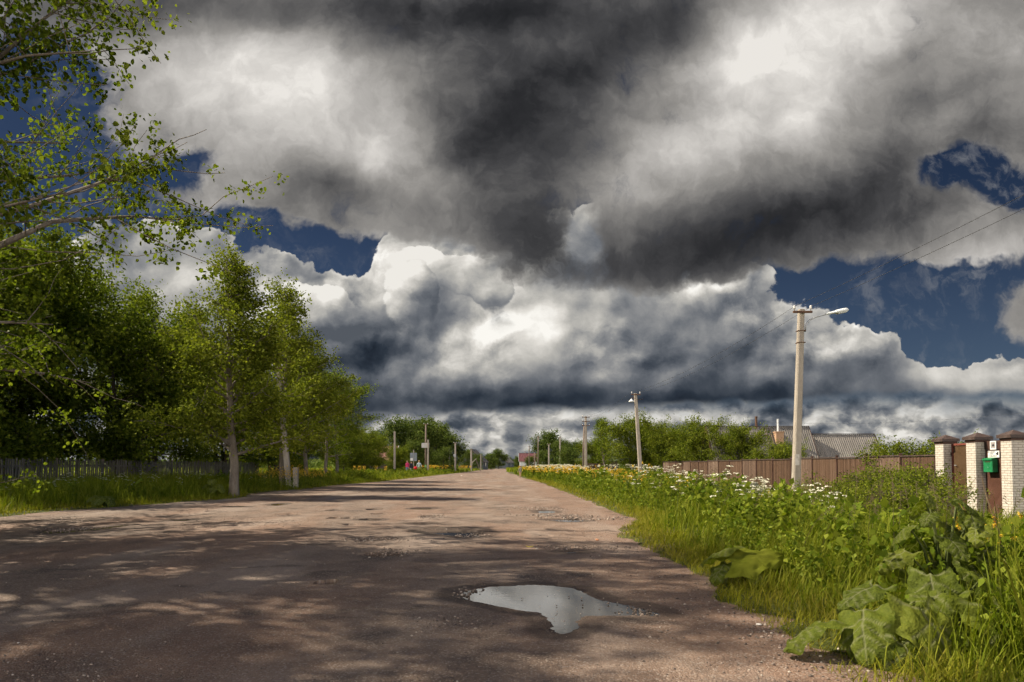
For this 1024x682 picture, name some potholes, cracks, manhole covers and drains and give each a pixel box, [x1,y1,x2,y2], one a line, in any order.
pothole [415,527,492,538]
pothole [454,584,666,635]
